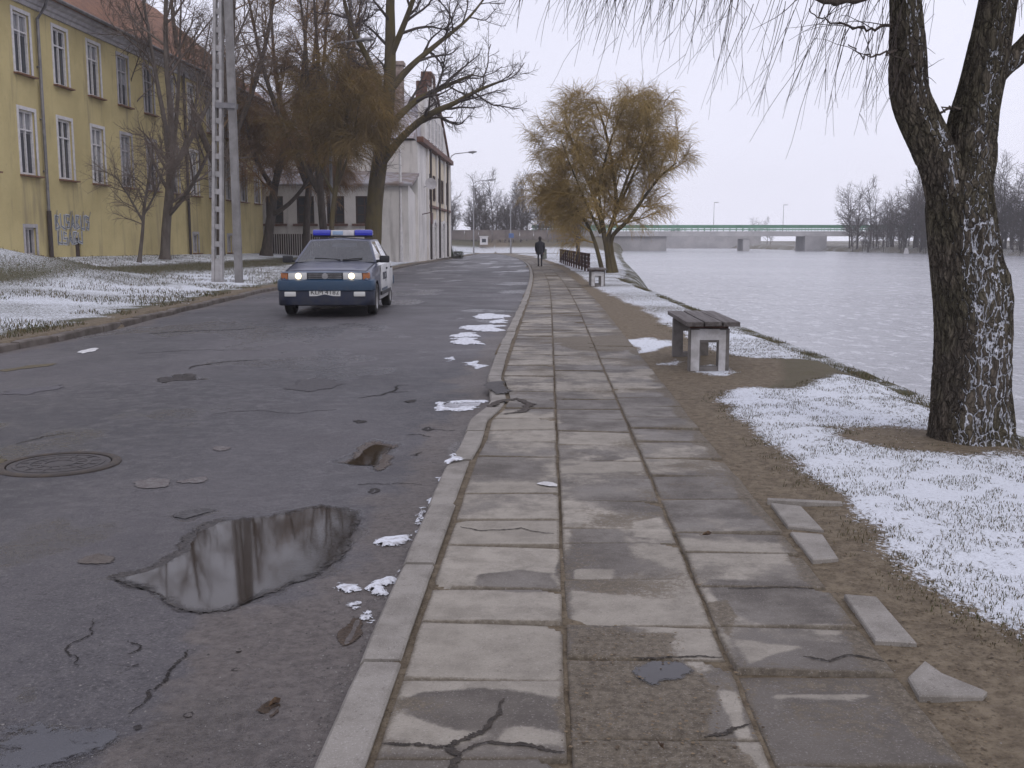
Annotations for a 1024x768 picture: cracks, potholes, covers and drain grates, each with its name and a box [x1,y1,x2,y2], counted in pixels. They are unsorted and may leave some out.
crack [704,723,751,737]
crack [803,654,884,662]
crack [64,621,94,666]
pothole [483,381,512,394]
pothole [341,441,399,471]
pothole [109,504,362,614]
manhole cover [0,451,122,478]
crack [444,698,564,768]
crack [127,641,188,714]
